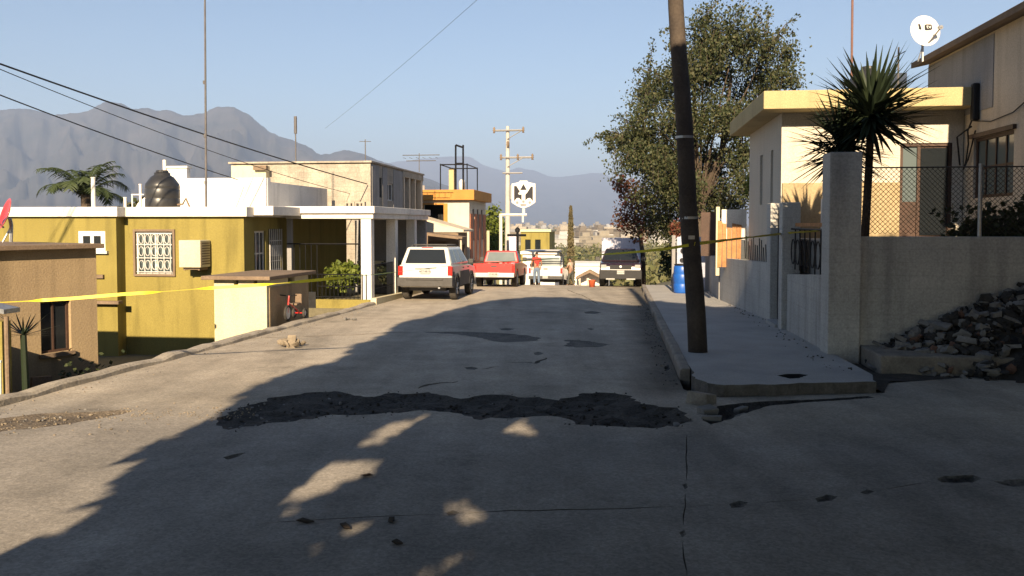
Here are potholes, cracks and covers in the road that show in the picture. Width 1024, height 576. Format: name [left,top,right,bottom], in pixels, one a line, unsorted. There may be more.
pothole [994,479,1024,487]
pothole [937,475,981,484]
pothole [426,332,541,342]
